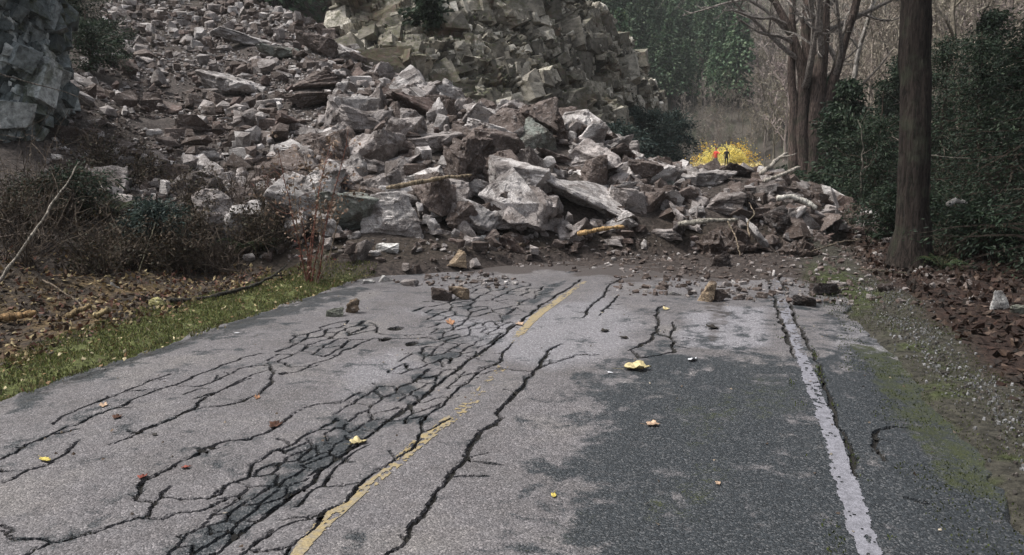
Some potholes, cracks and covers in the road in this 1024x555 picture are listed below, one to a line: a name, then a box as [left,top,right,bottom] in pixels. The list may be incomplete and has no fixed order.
crack [633,306,689,359]
crack [585,278,622,316]
crack [1,283,588,555]
